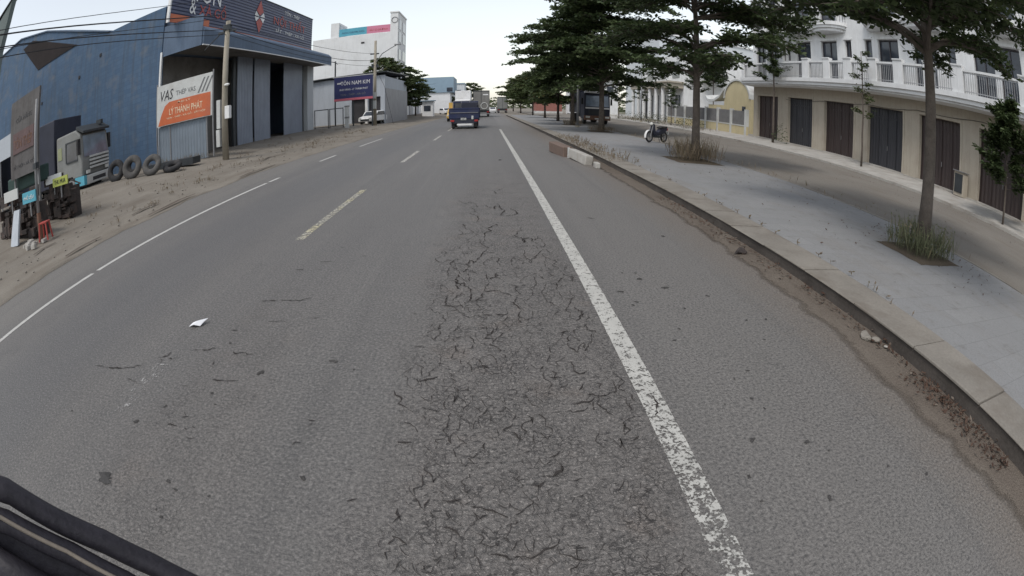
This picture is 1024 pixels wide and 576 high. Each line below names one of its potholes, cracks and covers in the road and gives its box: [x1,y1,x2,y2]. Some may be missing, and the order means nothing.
crack [367,190,639,576]
crack [615,478,696,576]
